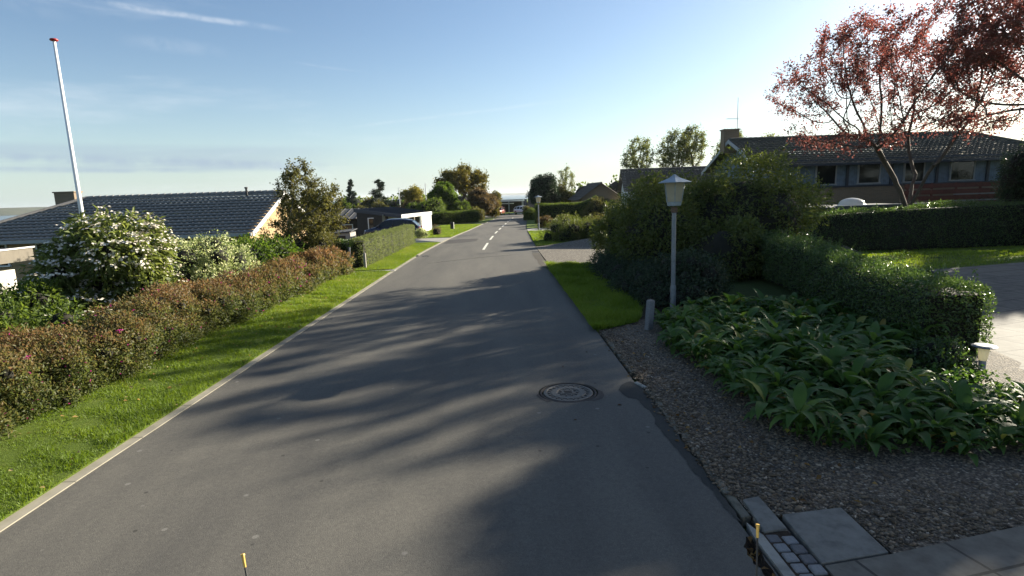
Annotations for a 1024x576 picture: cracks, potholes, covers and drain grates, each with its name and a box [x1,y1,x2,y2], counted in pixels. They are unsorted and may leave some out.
manhole cover [537,383,604,403]
